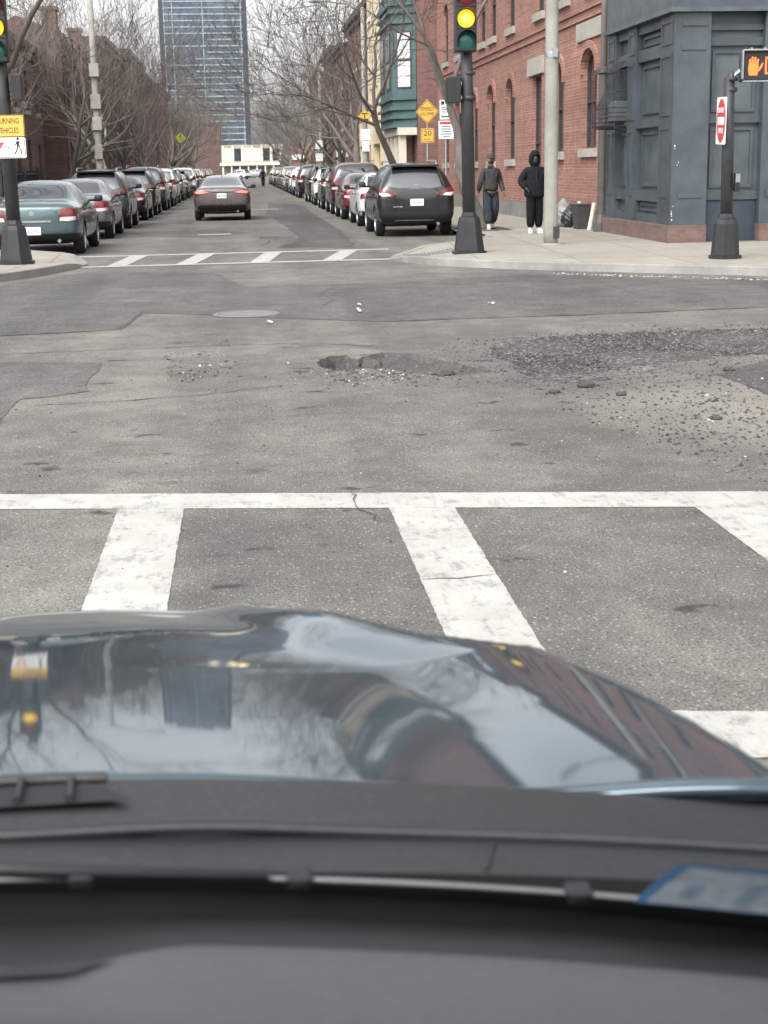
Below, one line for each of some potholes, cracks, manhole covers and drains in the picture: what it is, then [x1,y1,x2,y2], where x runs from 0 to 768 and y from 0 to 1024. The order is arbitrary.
crack [350,490,377,520]
pothole [489,328,768,383]
pothole [317,352,494,377]
pothole [165,352,238,383]
